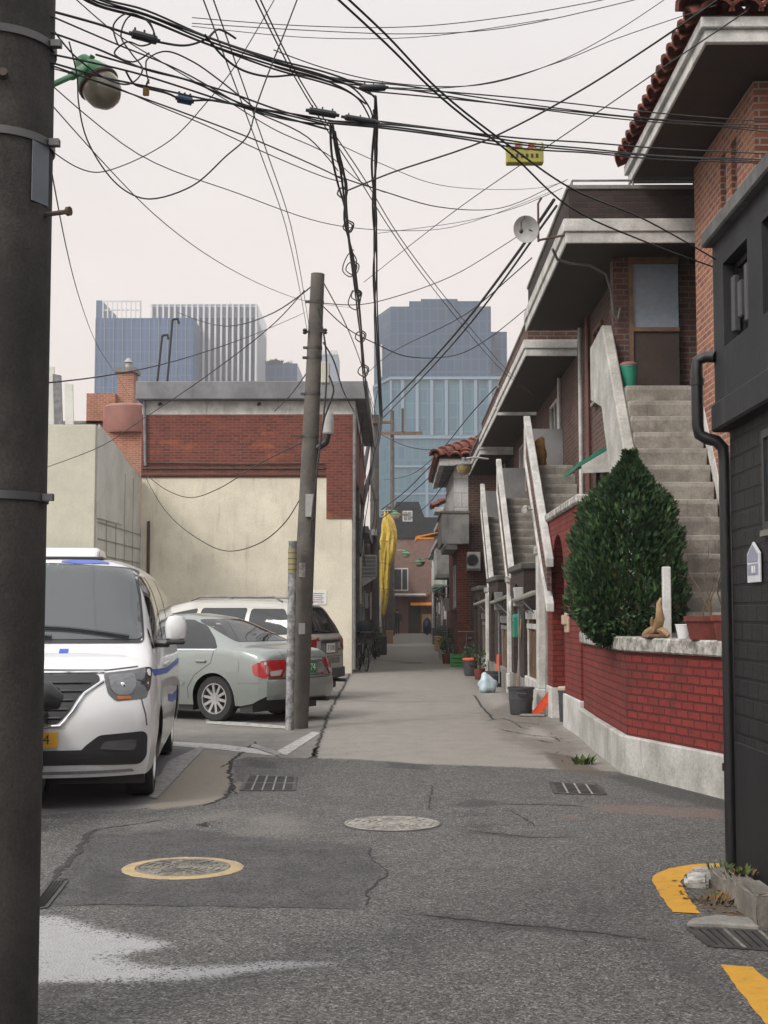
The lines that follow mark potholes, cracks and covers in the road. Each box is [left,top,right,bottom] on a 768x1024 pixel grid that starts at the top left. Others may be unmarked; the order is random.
crack [473,804,591,839]
drain grate [40,880,69,909]
crack [365,847,389,907]
manhole cover [342,816,443,832]
crack [203,741,256,806]
drain grate [686,927,768,951]
manhole cover [121,857,244,880]
drain grate [549,782,607,795]
crack [473,695,560,743]
drain grate [239,775,298,791]
